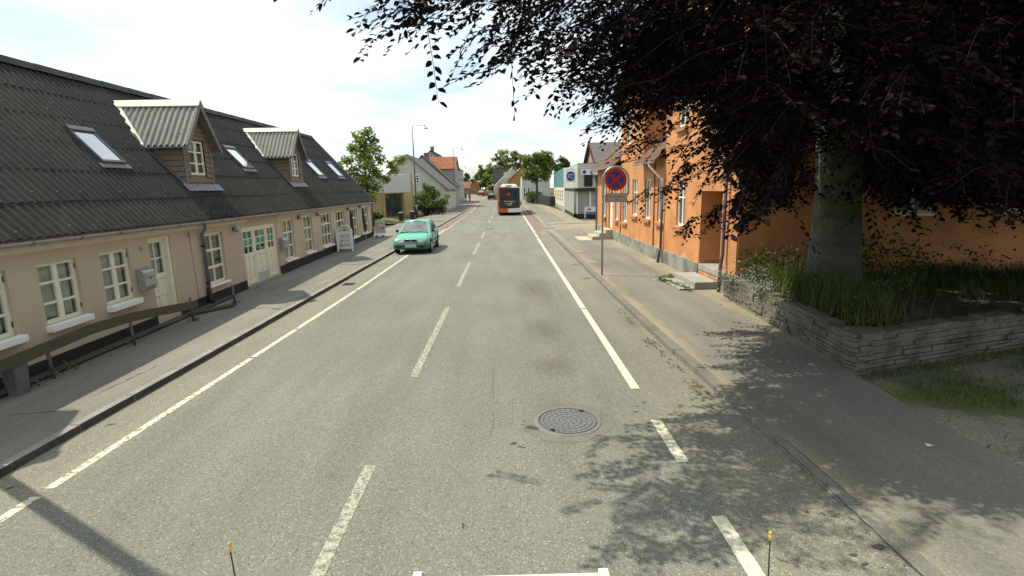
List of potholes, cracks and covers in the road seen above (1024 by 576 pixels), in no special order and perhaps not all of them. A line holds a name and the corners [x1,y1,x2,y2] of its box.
manhole cover [534,407,602,437]
